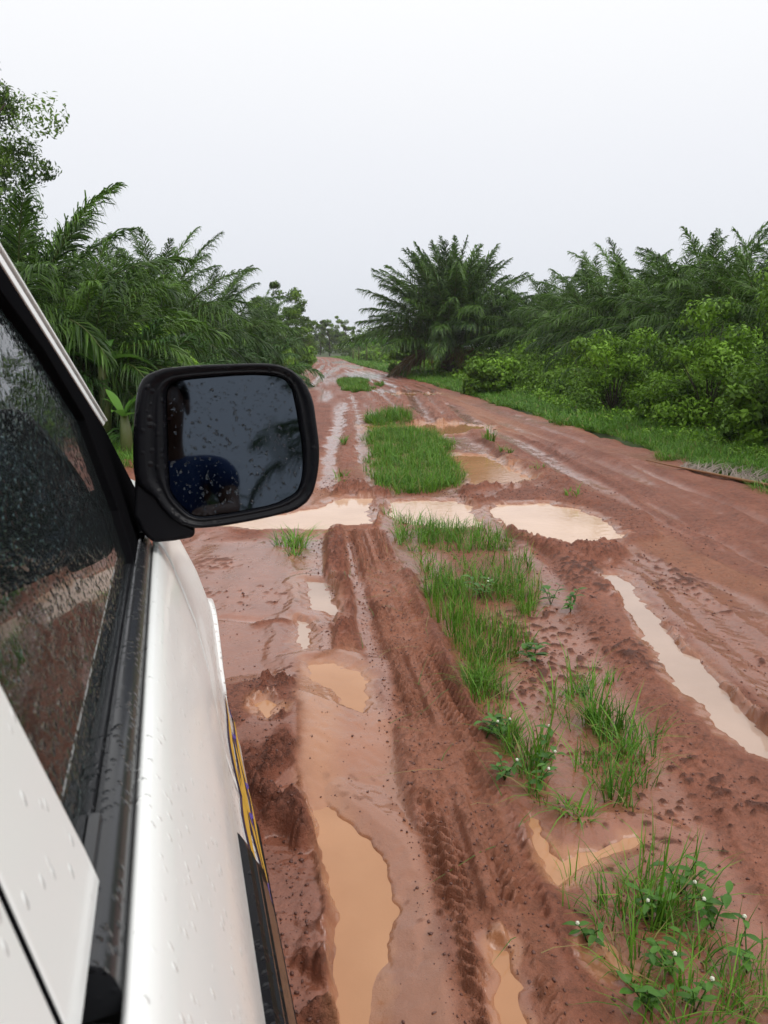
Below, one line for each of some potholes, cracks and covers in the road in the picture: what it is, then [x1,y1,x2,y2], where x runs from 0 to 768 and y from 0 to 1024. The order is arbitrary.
pothole [380,496,493,530]
pothole [485,500,630,543]
pothole [223,490,383,530]
pothole [449,452,539,485]
